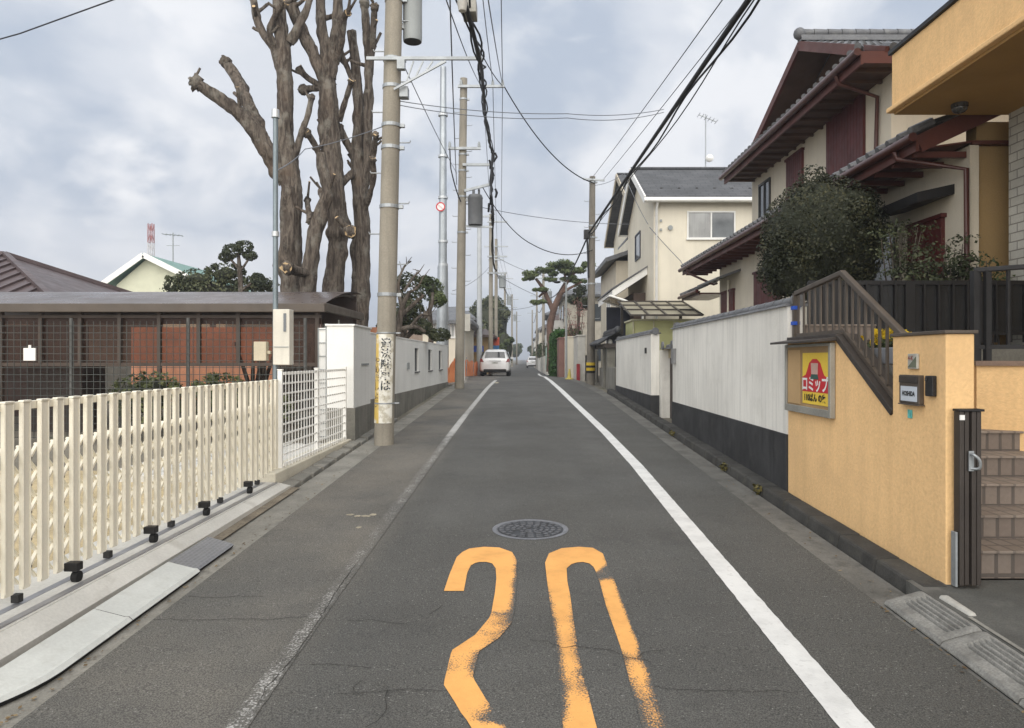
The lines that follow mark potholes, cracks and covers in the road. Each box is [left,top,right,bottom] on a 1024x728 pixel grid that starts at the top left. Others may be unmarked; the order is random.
manhole cover [492,519,568,540]
